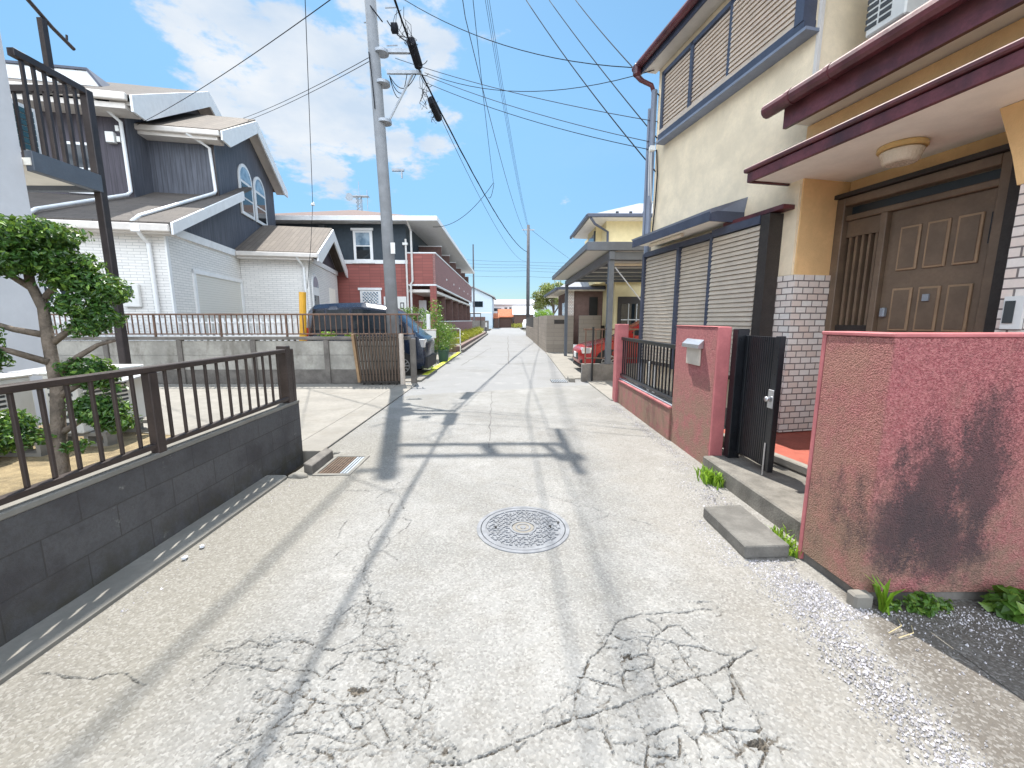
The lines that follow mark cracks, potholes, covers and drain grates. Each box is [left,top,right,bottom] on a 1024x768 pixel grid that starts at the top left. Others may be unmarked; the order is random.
crack [199,564,788,768]
drain grate [312,455,370,476]
manhole cover [477,506,570,554]
crack [31,673,144,686]
crack [334,470,420,604]
